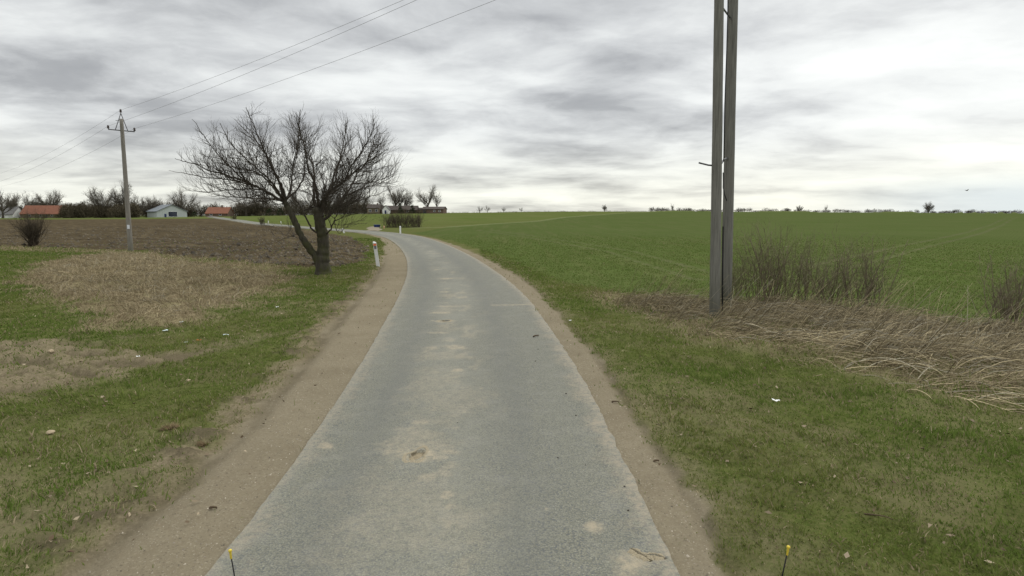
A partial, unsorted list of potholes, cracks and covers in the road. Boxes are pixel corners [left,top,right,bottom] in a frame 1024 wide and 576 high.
pothole [402,445,429,463]
crack [627,548,665,562]
